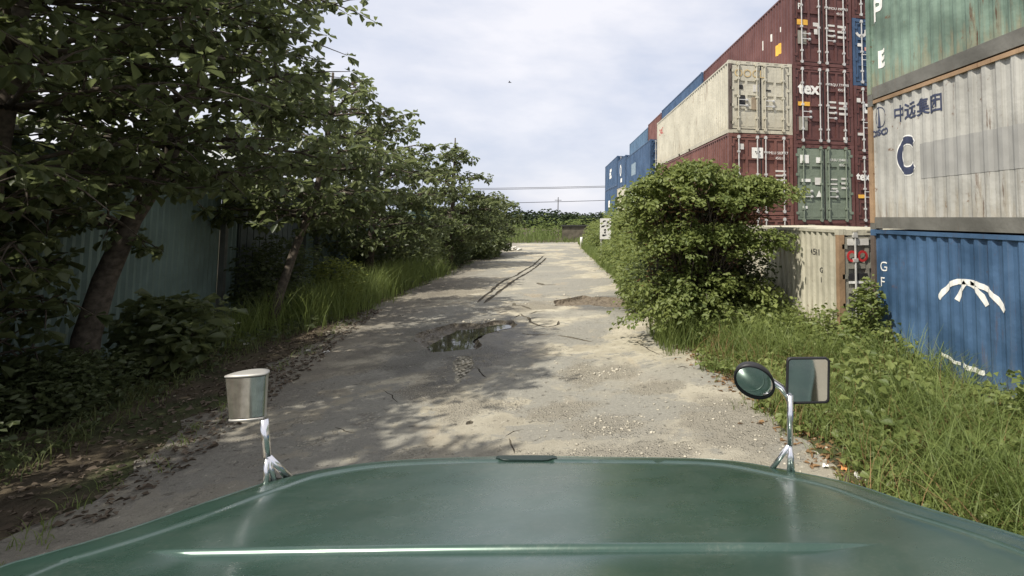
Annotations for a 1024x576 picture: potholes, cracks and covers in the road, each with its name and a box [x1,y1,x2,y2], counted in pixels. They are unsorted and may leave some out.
crack [477,256,592,342]
pothole [414,320,517,350]
pothole [554,295,626,307]
